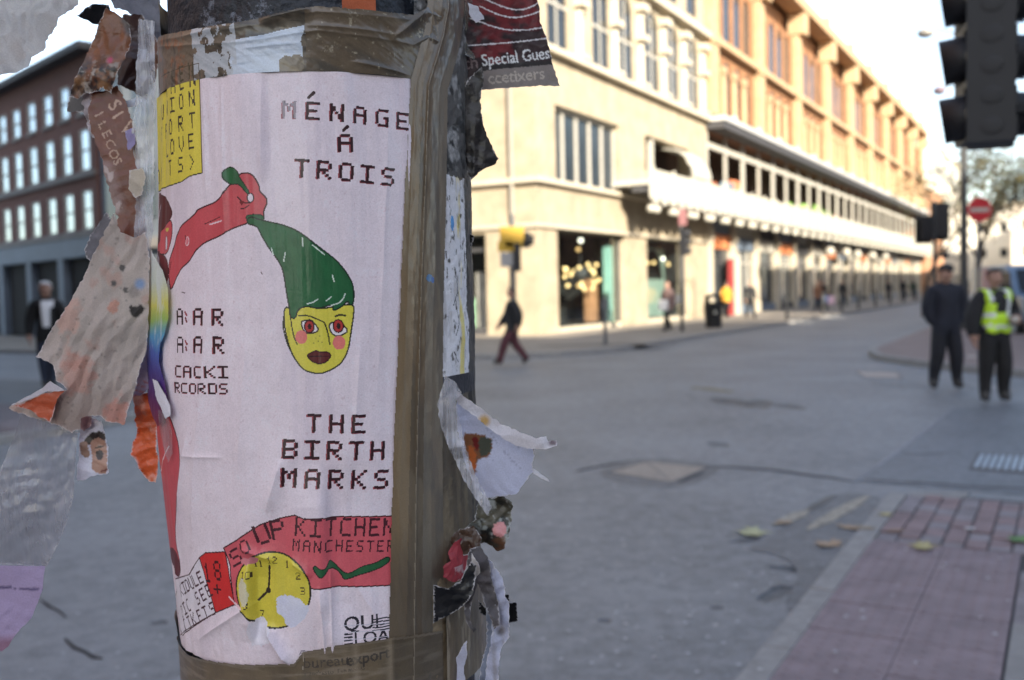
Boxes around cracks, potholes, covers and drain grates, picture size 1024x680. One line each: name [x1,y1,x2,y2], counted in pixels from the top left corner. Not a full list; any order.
manhole cover [607,461,709,483]
pothole [755,585,793,603]
